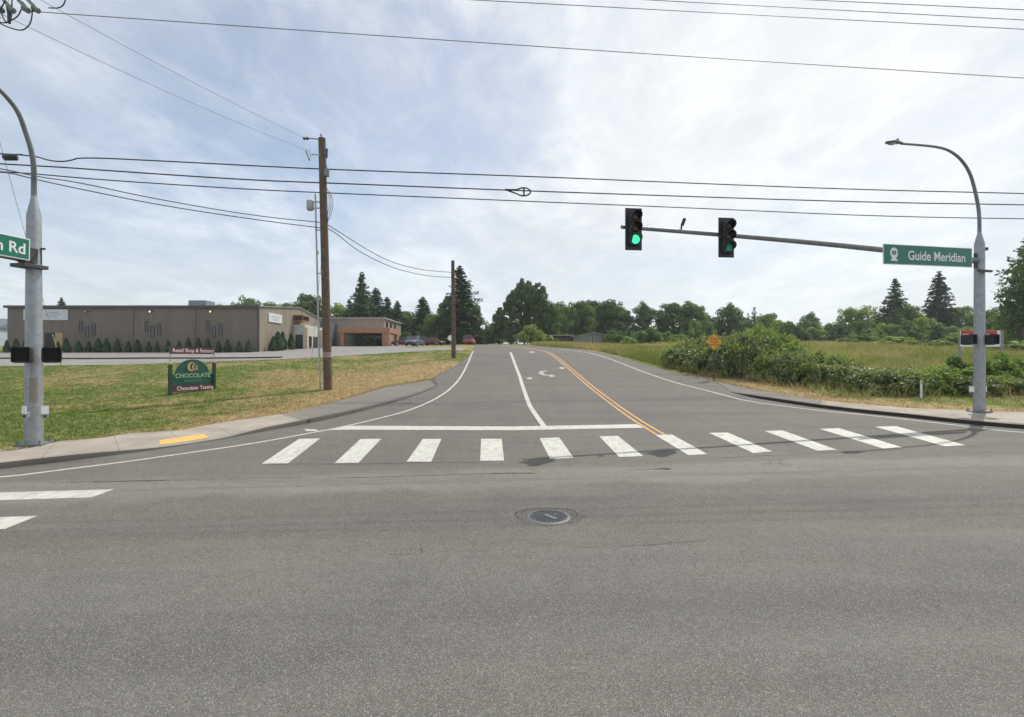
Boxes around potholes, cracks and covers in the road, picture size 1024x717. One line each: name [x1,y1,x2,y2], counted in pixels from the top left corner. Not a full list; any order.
manhole cover [516,509,587,527]
